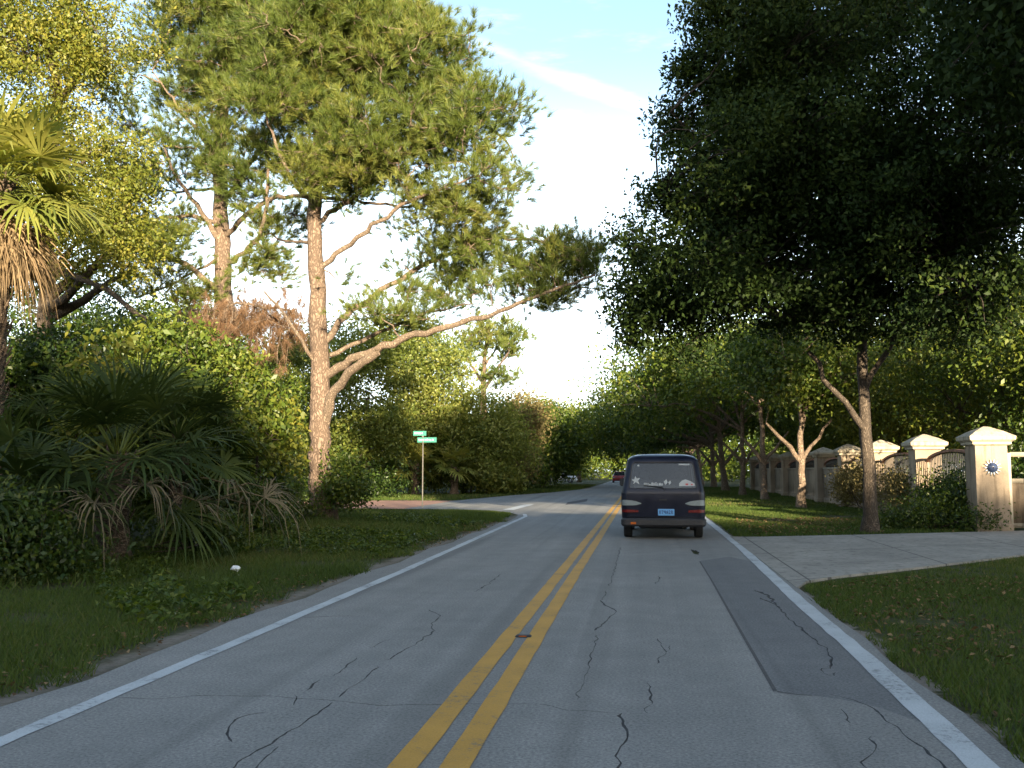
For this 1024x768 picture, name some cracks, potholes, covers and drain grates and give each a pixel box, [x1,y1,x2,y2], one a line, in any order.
crack [140,610,653,768]
crack [754,590,835,676]
crack [835,695,947,768]
